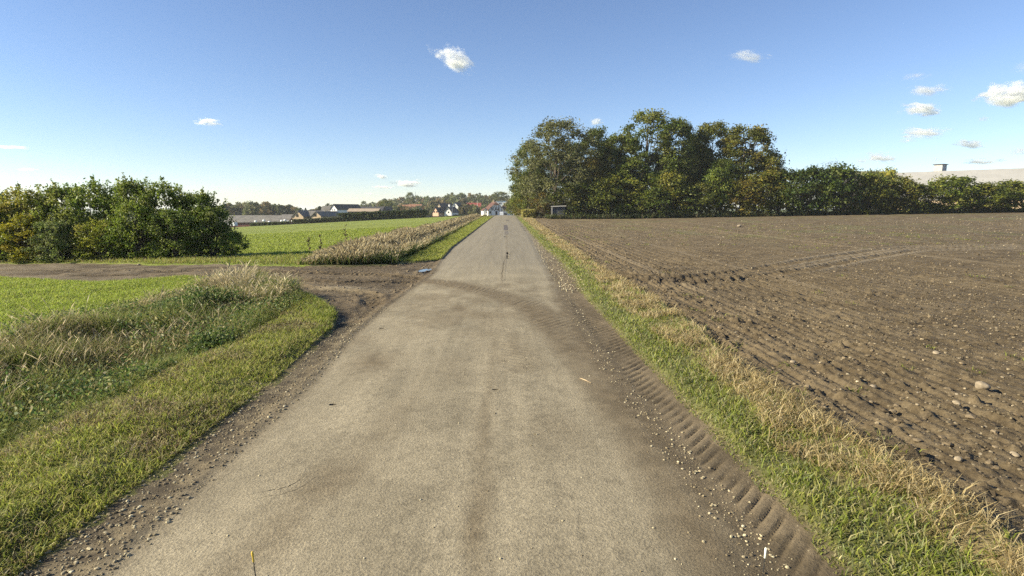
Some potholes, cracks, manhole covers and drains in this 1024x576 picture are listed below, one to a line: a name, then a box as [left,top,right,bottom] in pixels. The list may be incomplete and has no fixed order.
crack [251,474,316,500]
crack [498,260,507,280]
